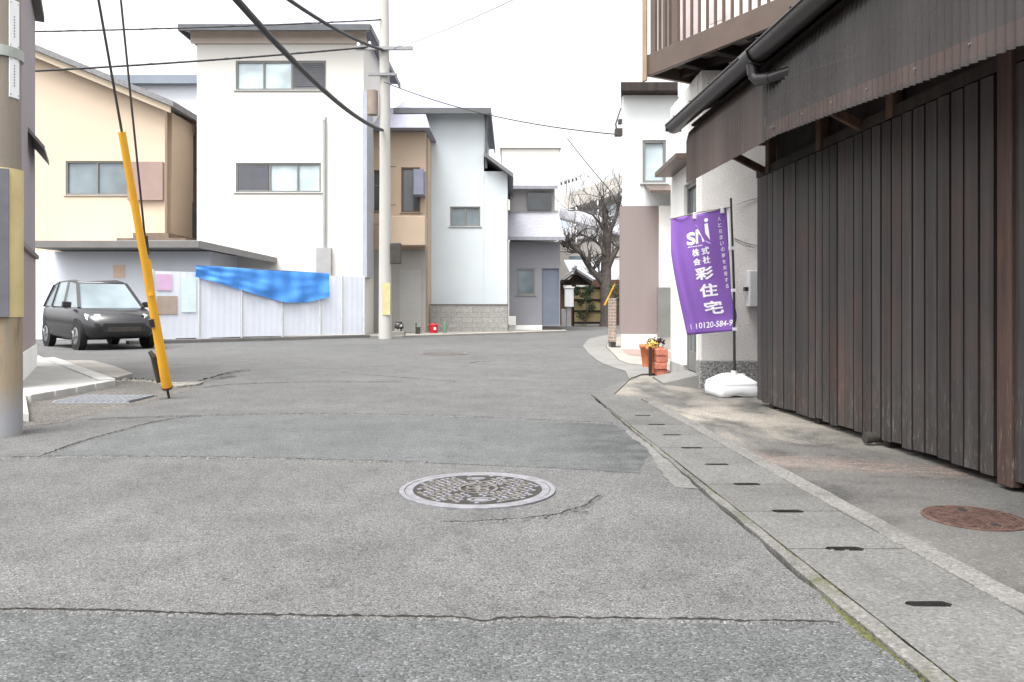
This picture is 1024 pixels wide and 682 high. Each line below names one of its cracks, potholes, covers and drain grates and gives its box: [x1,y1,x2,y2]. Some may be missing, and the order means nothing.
drain grate [51,395,156,403]
crack [115,370,455,388]
manhole cover [920,505,1024,532]
manhole cover [399,472,556,510]
crack [443,495,603,525]
